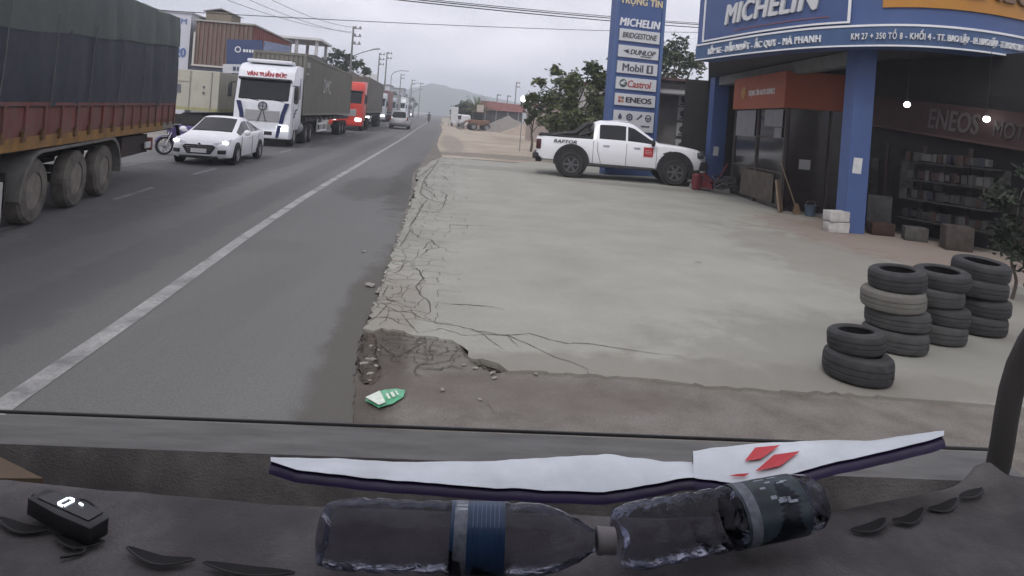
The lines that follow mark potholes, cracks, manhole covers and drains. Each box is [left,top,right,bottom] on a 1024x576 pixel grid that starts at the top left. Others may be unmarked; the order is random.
crack [366,158,686,376]
pothole [357,332,382,385]
